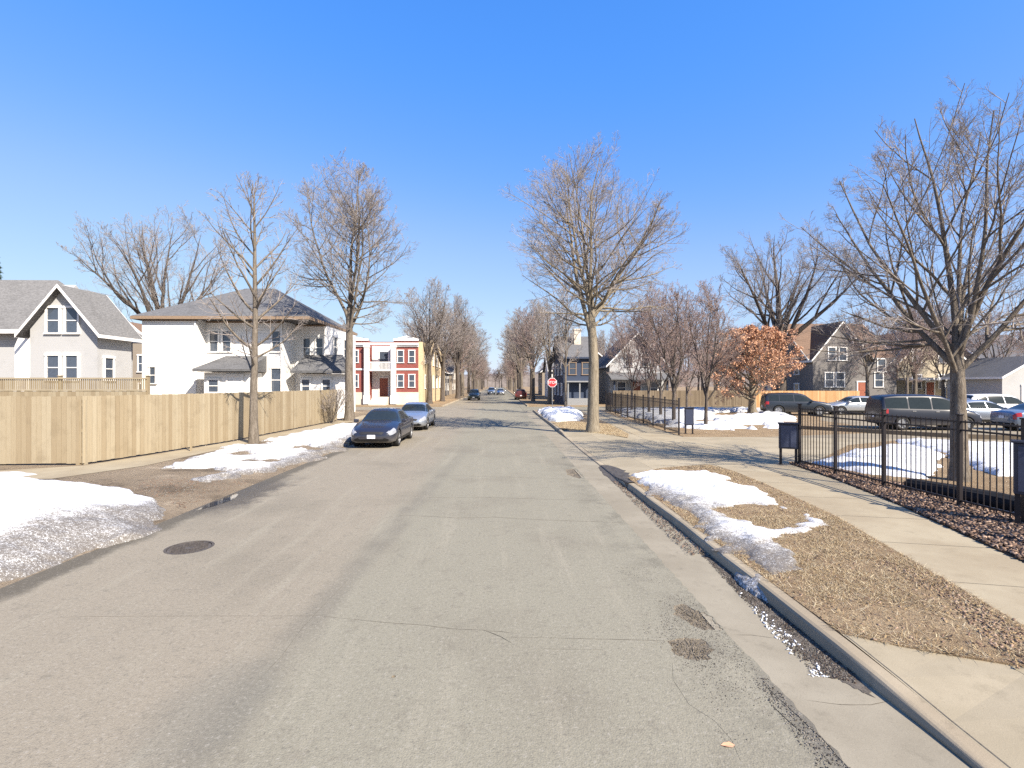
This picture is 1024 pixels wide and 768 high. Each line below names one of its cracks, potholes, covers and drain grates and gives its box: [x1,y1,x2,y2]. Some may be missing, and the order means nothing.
pothole [667,637,715,661]
pothole [673,604,723,630]
manhole cover [163,540,215,555]
